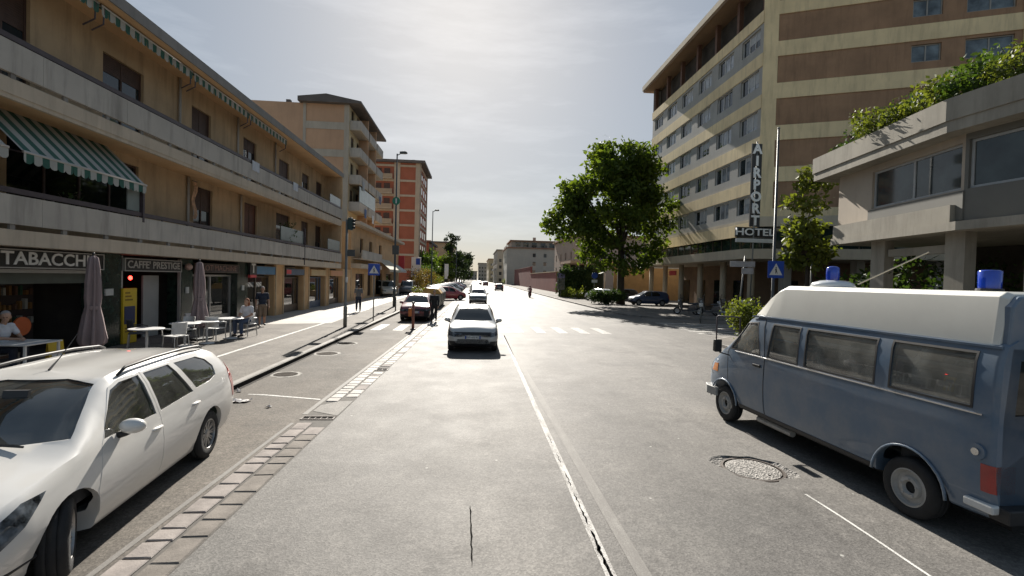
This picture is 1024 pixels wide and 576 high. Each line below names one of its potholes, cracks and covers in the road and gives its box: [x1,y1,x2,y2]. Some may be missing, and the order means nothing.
crack [550,440,613,576]
manhole cover [709,455,801,483]
